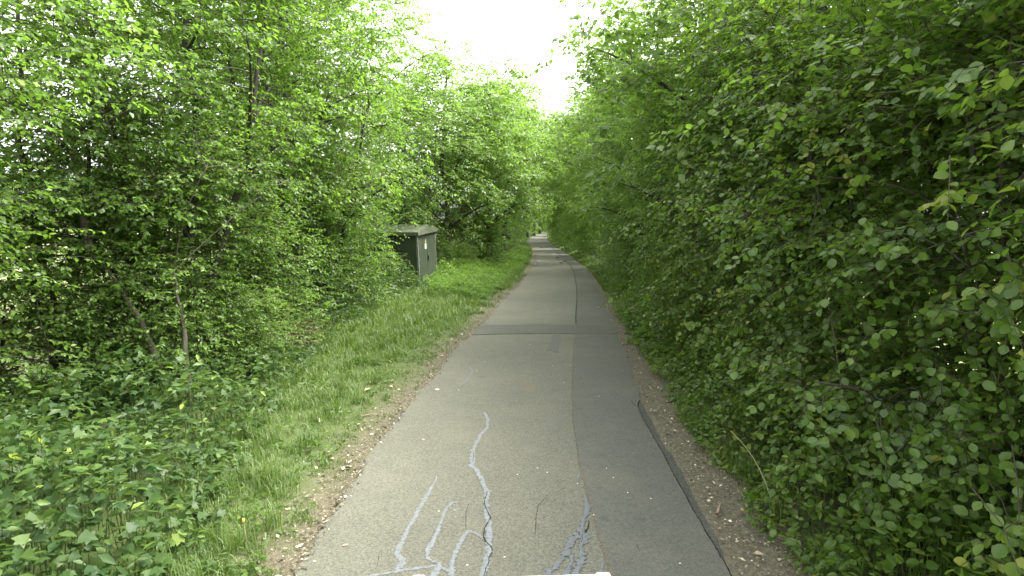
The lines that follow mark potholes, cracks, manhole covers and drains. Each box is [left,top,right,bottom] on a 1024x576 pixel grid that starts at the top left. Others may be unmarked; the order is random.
crack [370,412,493,576]
crack [535,487,592,576]
